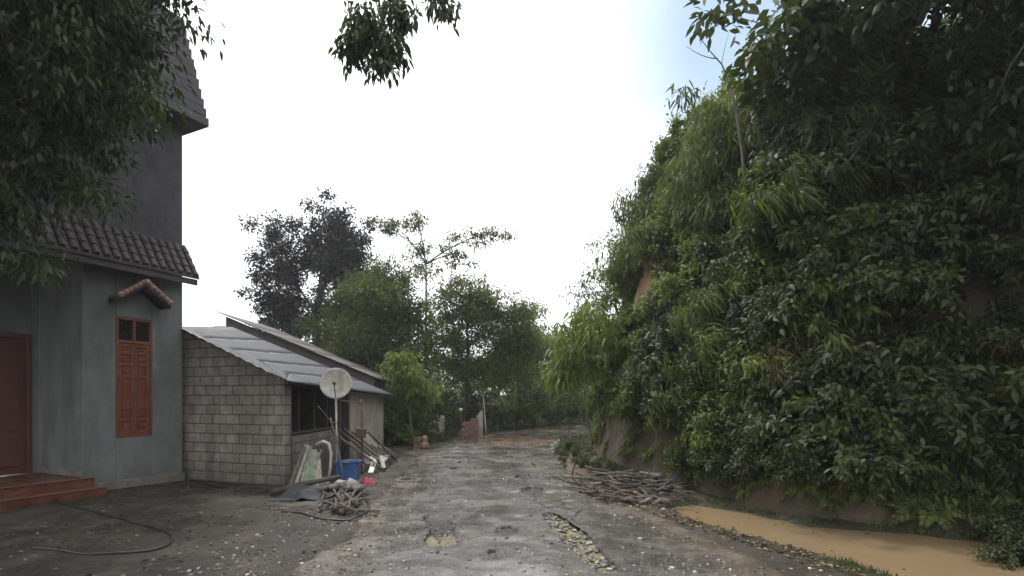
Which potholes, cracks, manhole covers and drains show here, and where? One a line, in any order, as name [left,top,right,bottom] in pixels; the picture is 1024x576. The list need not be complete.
pothole [539,510,628,576]
pothole [415,513,464,549]
